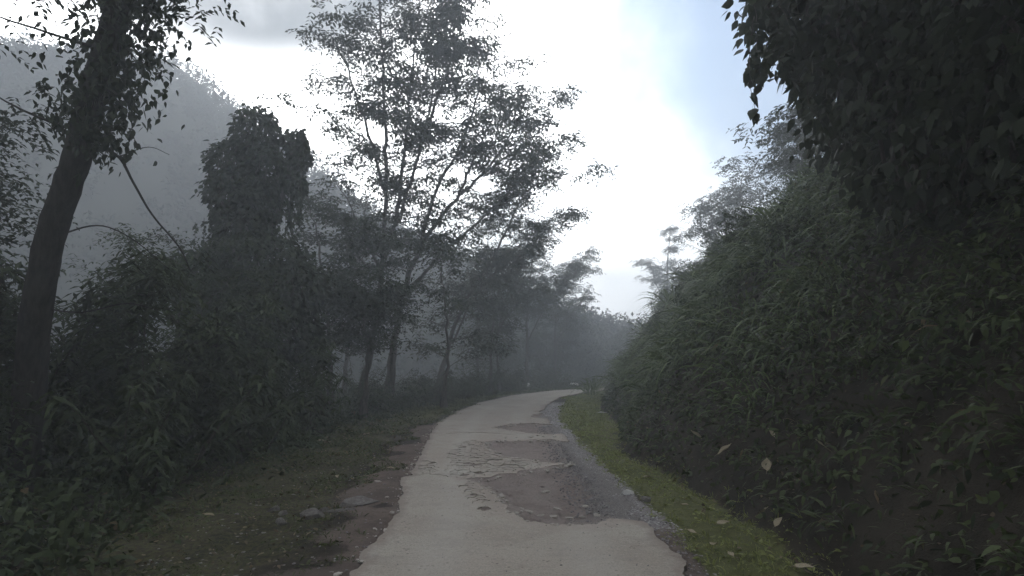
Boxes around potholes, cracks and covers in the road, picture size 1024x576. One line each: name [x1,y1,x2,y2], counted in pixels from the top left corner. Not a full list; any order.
pothole [467,463,641,525]
crack [452,447,541,476]
pothole [495,424,567,434]
